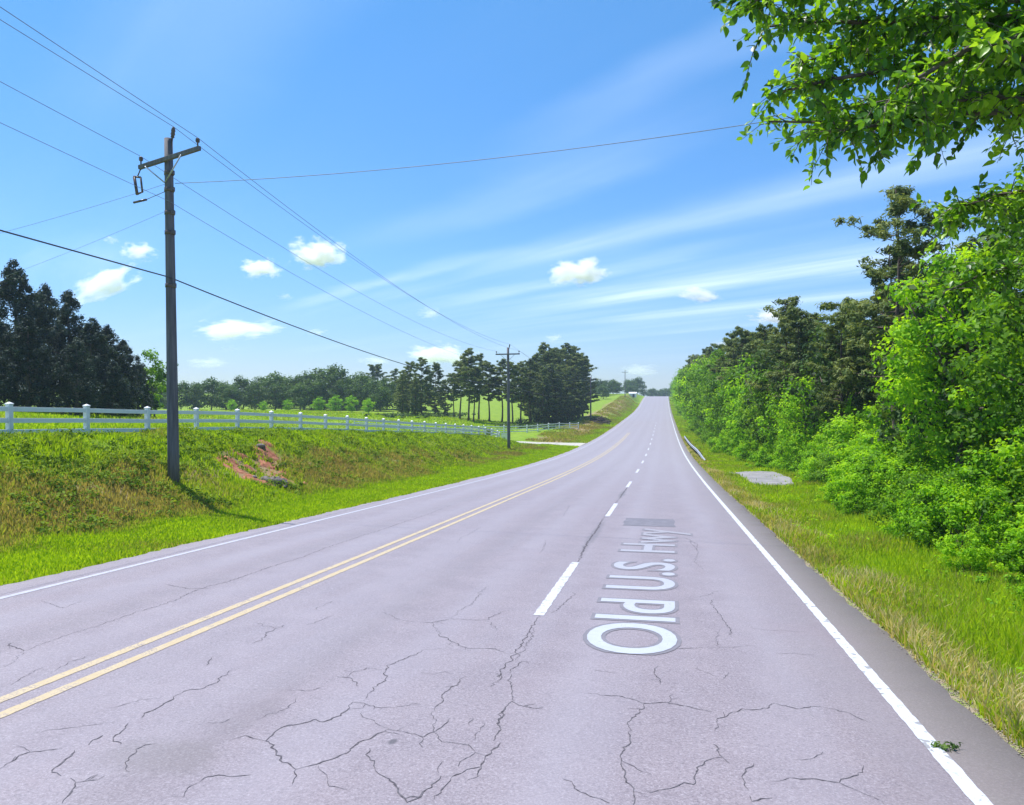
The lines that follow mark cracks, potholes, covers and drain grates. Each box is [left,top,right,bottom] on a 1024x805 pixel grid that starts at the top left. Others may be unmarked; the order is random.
crack [234,649,543,802]
crack [778,765,884,804]
crack [0,658,229,803]
crack [594,668,868,804]
